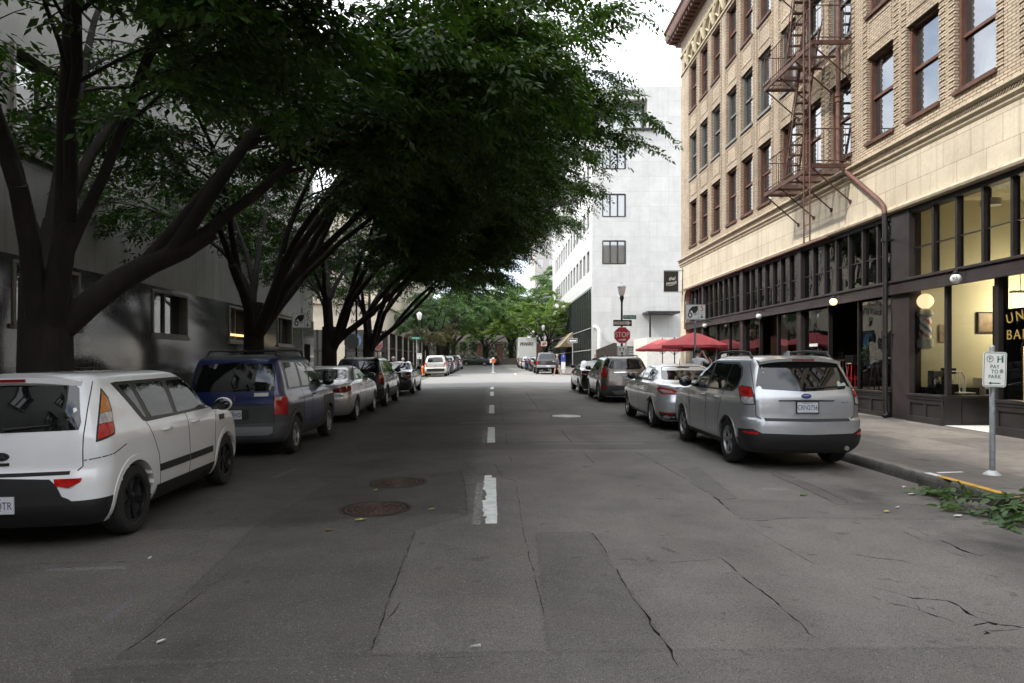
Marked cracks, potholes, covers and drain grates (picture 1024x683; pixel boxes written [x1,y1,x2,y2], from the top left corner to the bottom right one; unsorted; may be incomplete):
crack [586,531,682,673]
manhole cover [339,501,412,517]
crack [872,588,1023,636]
crack [888,522,1018,559]
crack [650,558,819,640]
manhole cover [368,477,427,488]
crack [495,432,544,614]
